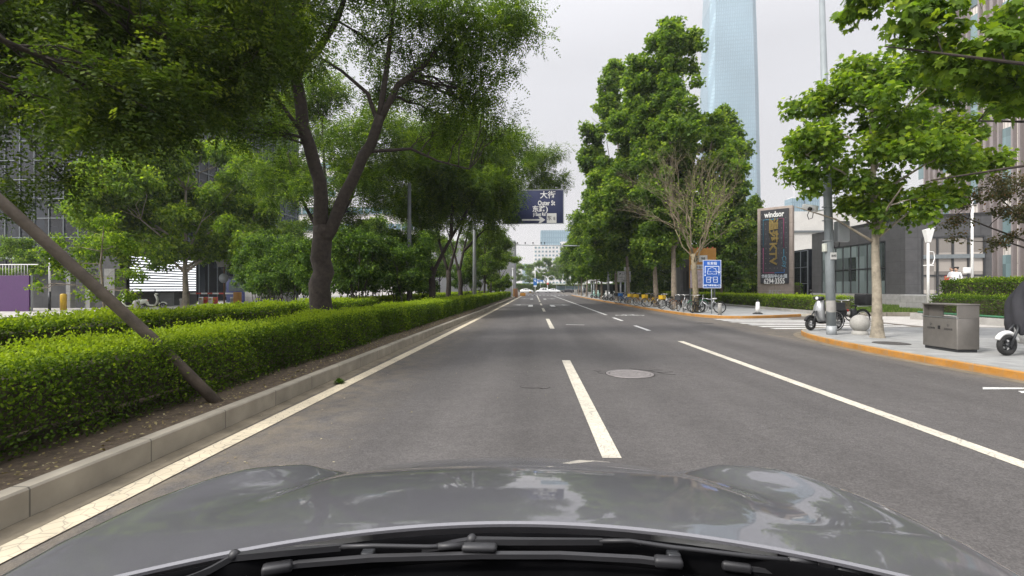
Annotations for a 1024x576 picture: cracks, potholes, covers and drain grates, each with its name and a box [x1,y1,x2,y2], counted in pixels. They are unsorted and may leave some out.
manhole cover [605,370,655,378]
